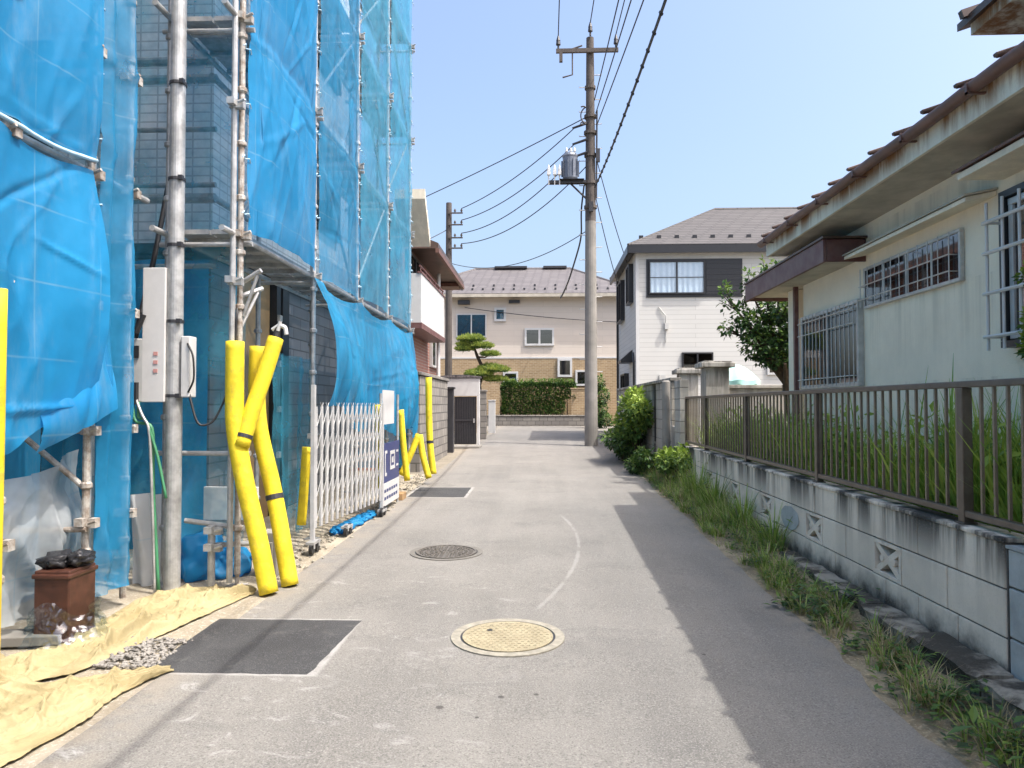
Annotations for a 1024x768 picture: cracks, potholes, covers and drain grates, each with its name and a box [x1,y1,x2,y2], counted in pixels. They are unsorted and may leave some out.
manhole cover [410,544,483,561]
manhole cover [451,619,565,657]
